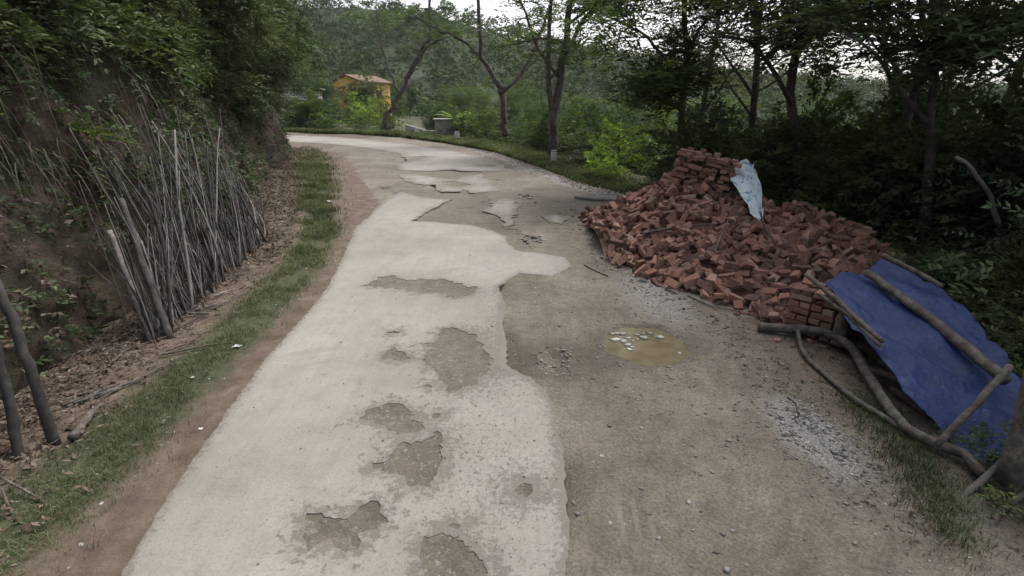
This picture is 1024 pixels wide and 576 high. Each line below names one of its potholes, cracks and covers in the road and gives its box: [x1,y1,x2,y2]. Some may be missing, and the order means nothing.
pothole [536,346,572,377]
pothole [521,234,546,245]
pothole [514,483,533,497]
pothole [420,533,488,576]
pothole [382,348,410,361]
pothole [372,431,443,487]
